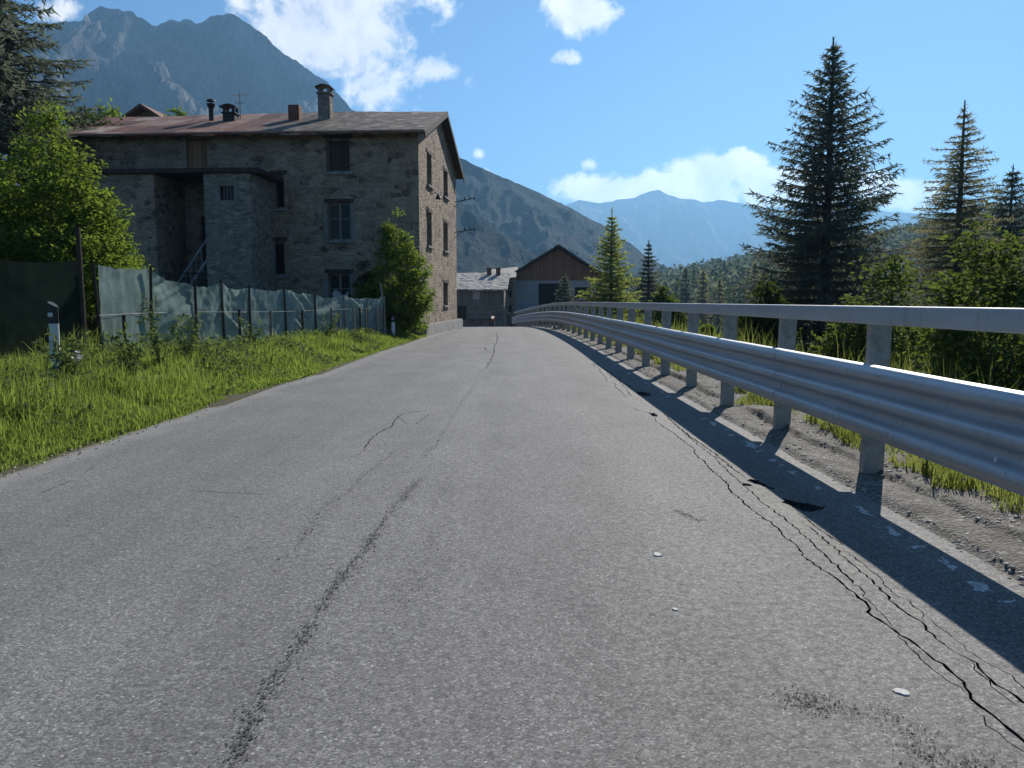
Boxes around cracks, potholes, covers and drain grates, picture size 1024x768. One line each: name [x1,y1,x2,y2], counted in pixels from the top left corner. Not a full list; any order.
crack [358,410,428,455]
pothole [782,498,825,512]
crack [594,364,1024,752]
